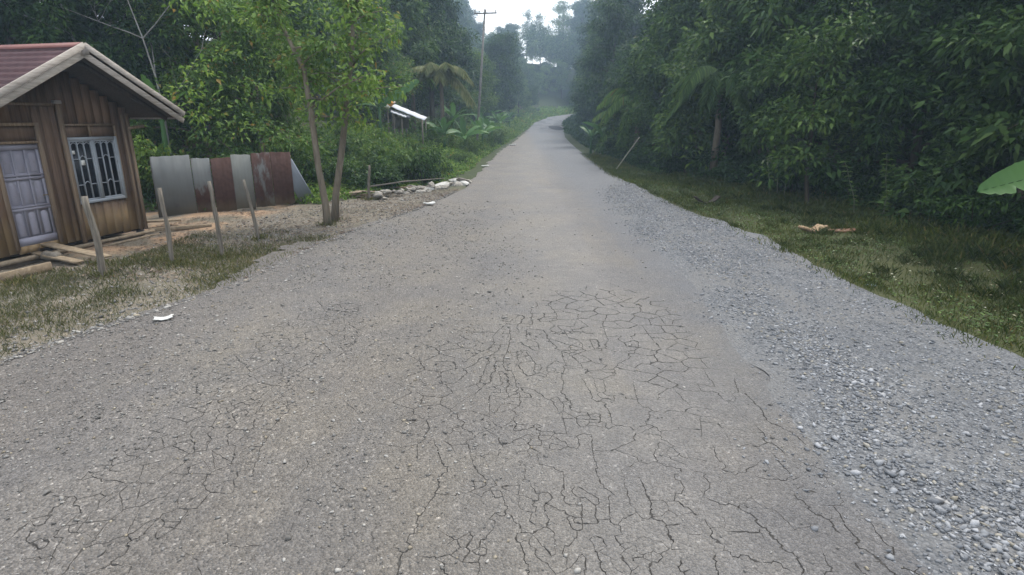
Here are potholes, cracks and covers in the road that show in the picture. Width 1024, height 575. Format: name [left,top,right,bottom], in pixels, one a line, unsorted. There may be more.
crack [330,287,920,575]
crack [1,301,392,575]
